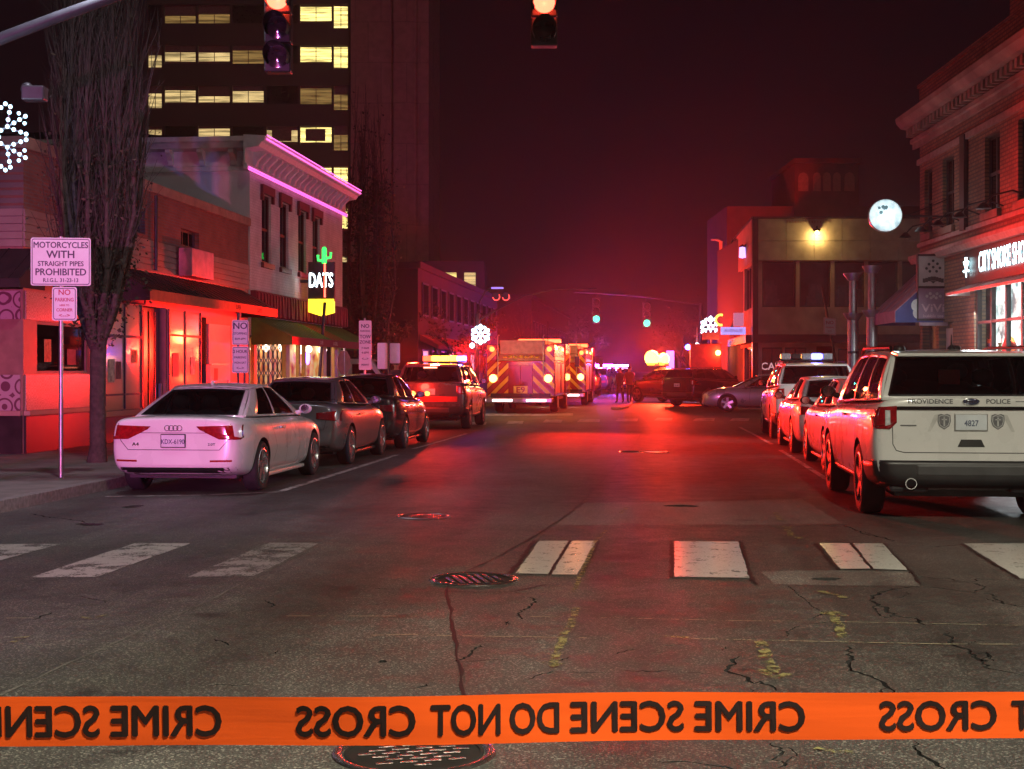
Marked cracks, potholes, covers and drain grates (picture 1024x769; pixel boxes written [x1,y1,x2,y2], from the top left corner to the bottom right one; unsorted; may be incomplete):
crack [506,592,537,625]
crack [845,646,919,693]
crack [869,572,1023,675]
crack [781,586,830,637]
manhole cover [331,744,497,769]
